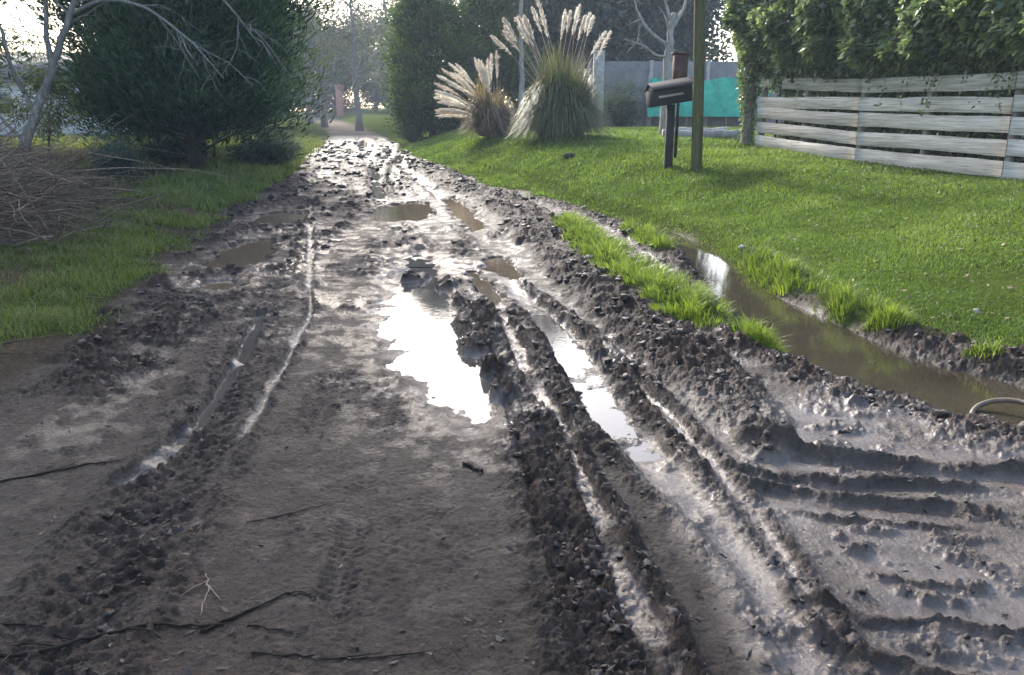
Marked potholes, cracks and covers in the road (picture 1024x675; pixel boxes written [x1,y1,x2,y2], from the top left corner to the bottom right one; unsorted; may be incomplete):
pothole [198,236,283,269]
pothole [433,196,493,234]
pothole [361,200,444,223]
